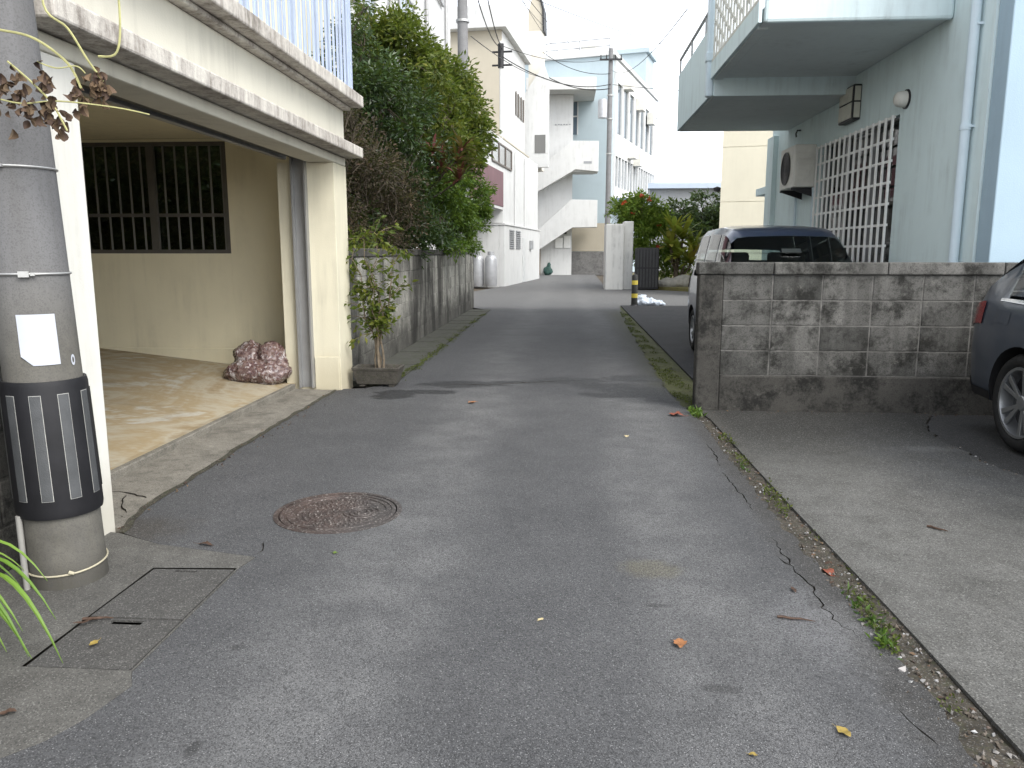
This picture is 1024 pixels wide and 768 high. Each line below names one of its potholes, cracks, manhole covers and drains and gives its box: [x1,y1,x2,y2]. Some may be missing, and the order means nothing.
crack [711,449,752,509]
crack [112,491,146,513]
crack [773,539,859,637]
manhole cover [273,492,402,534]
crack [899,710,939,746]
